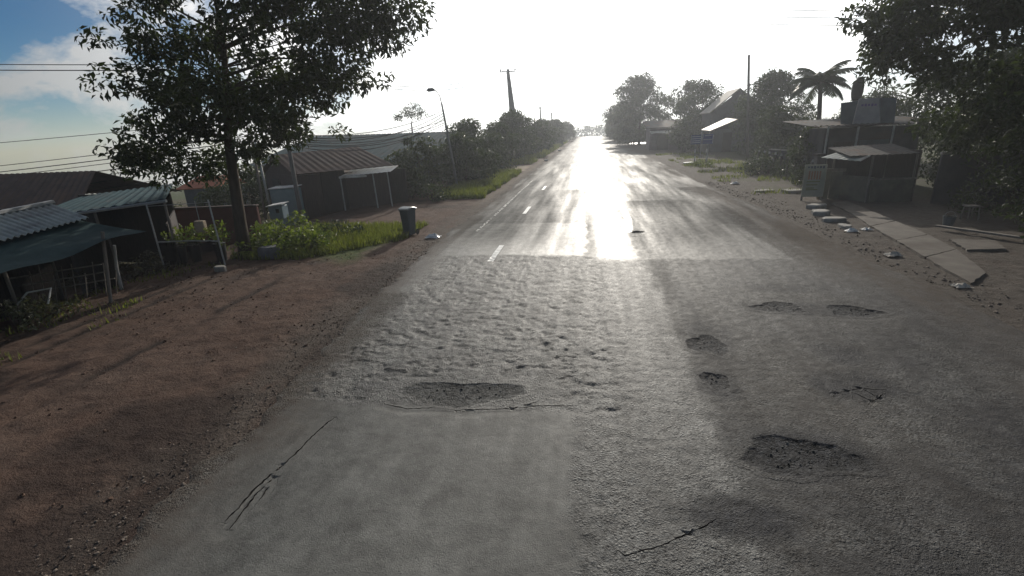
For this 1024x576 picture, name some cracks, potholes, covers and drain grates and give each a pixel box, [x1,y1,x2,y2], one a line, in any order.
crack [610,514,722,562]
crack [219,417,338,530]
pothole [692,369,737,396]
crack [382,400,576,415]
pothole [819,304,897,319]
pothole [679,332,735,359]
pothole [741,300,814,315]
pothole [728,431,889,483]
pothole [390,381,537,410]
